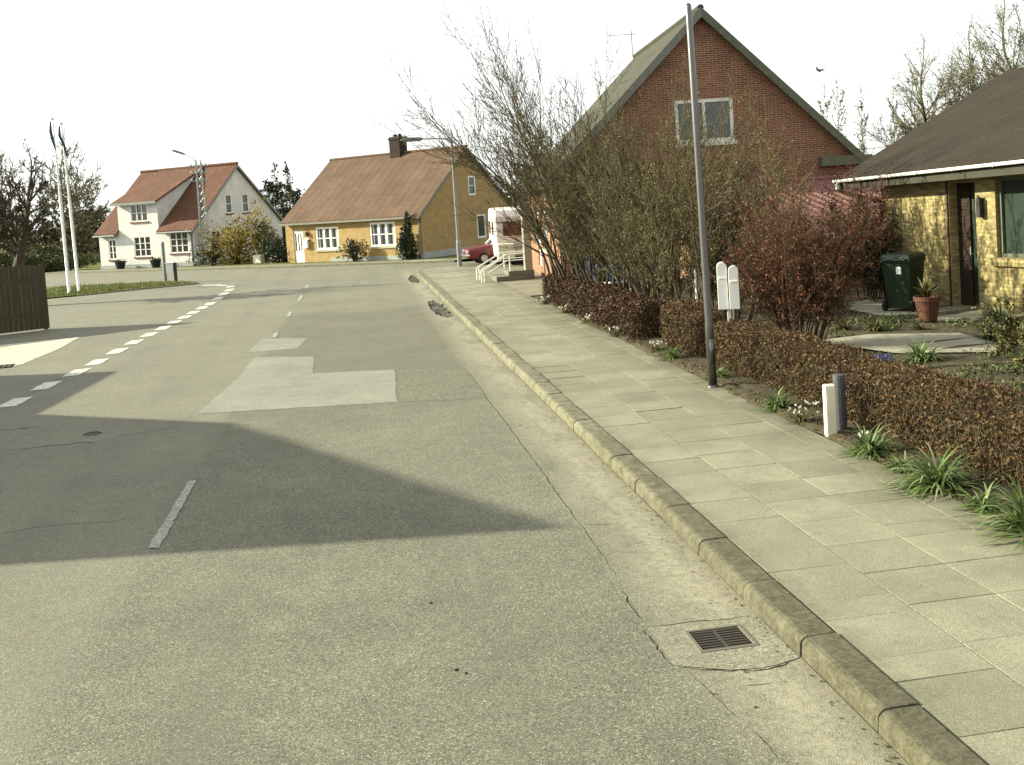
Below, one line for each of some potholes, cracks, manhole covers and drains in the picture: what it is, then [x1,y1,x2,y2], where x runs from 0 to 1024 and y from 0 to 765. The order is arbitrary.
pothole [427,300,454,318]
crack [6,442,92,451]
